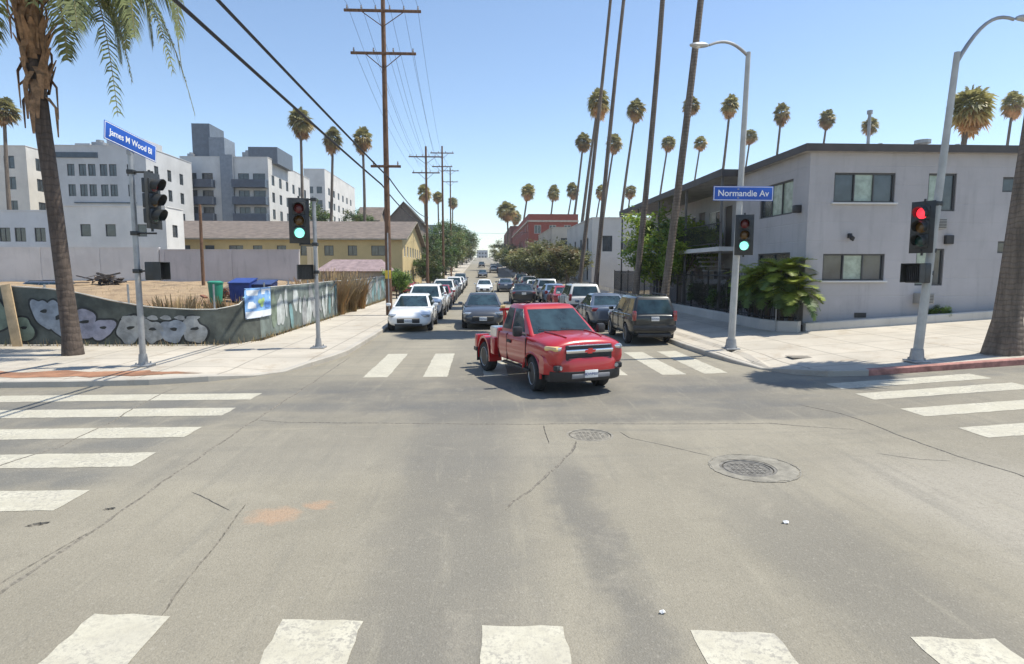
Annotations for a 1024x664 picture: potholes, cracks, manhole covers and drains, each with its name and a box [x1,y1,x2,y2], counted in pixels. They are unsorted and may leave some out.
manhole cover [708,454,802,482]
crack [505,426,576,510]
crack [803,405,1024,477]
manhole cover [567,429,614,441]
